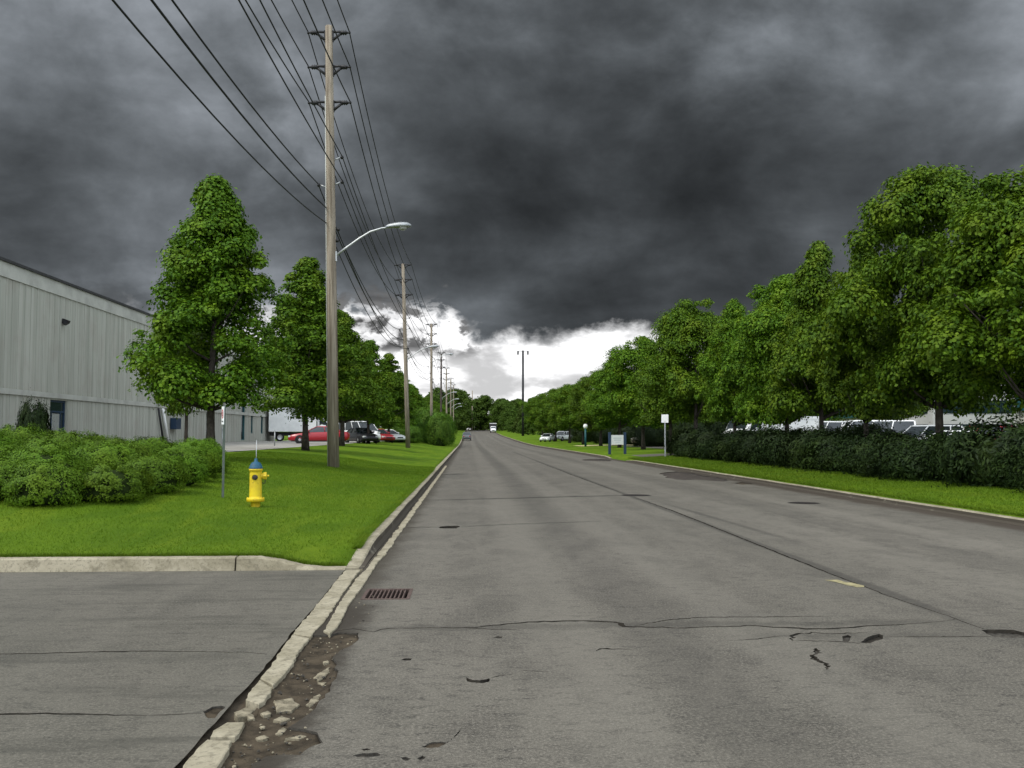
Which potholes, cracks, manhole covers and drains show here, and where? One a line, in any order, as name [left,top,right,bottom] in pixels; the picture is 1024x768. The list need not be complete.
pothole [422,730,460,748]
pothole [221,632,359,768]
drain grate [360,588,413,600]
crack [338,616,988,670]
pothole [862,634,884,643]
pothole [982,629,1024,638]
